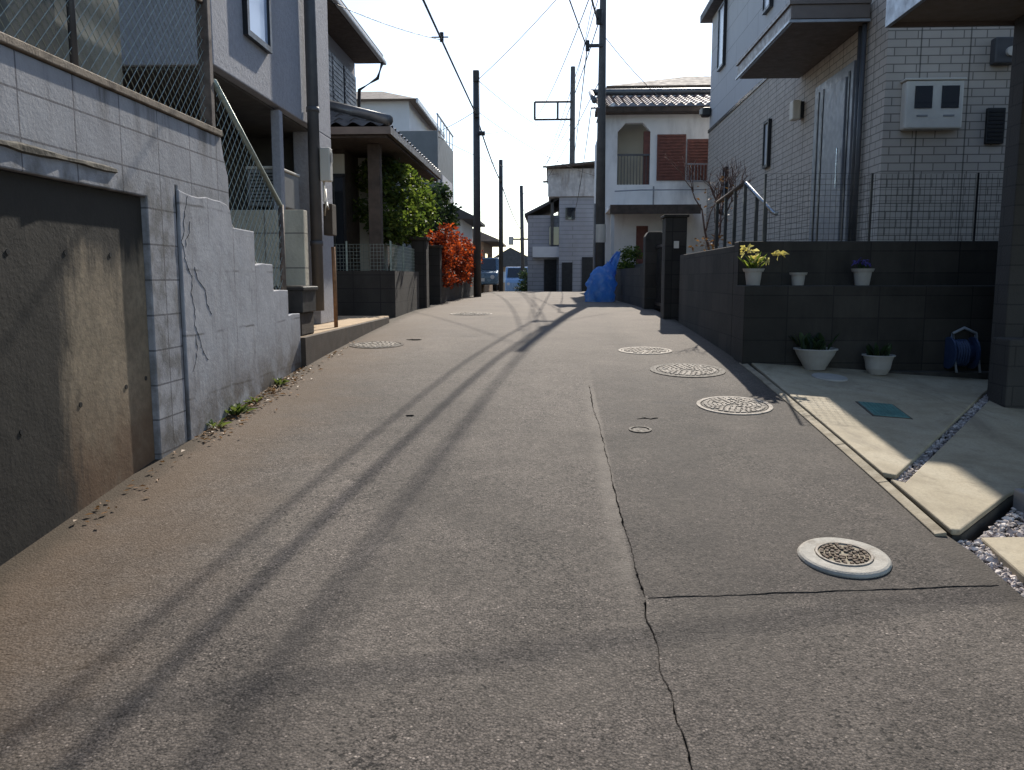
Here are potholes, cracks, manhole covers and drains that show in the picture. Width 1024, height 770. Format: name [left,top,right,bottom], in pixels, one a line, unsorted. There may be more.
manhole cover [696,396,773,415]
manhole cover [349,341,404,349]
crack [644,601,694,770]
manhole cover [797,537,892,579]
manhole cover [618,347,672,355]
manhole cover [650,363,726,378]
